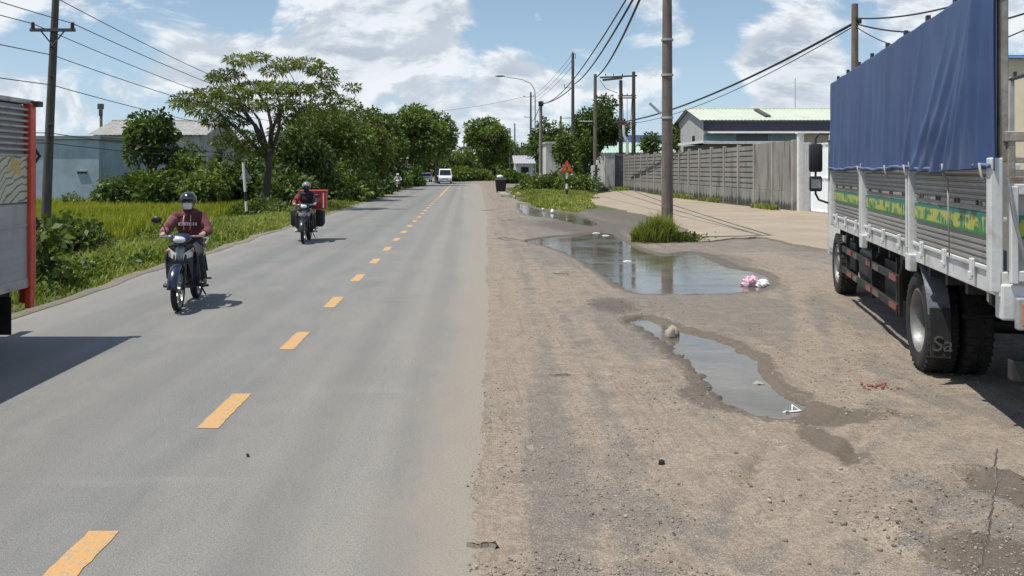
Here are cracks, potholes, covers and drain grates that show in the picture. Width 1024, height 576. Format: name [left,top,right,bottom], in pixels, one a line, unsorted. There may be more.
pothole [518,231,785,296]
pothole [611,314,839,425]
pothole [515,203,606,226]
crack [978,448,999,568]
